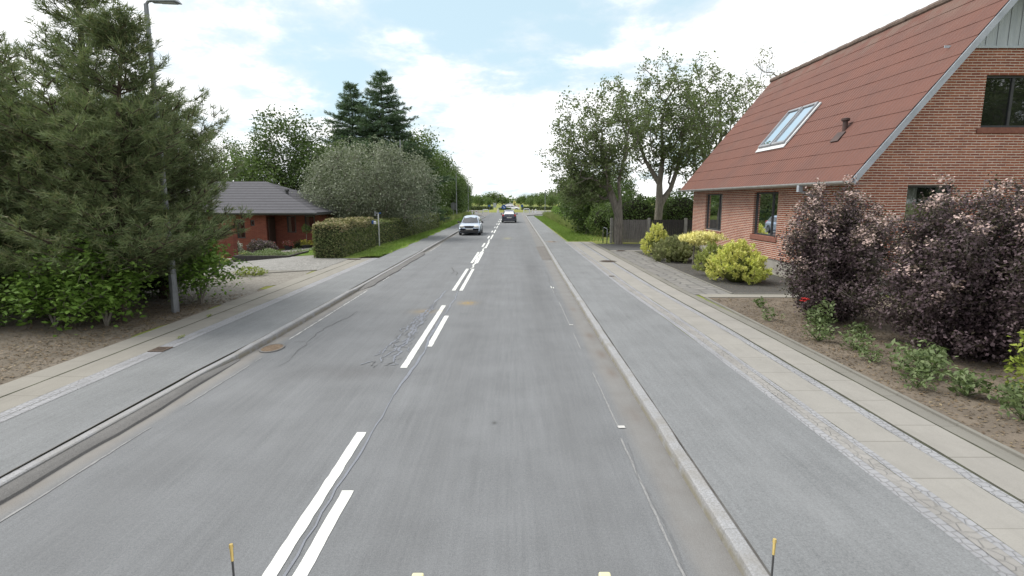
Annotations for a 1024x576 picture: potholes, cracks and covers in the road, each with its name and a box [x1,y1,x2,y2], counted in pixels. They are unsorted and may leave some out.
manhole cover [259,343,285,353]
